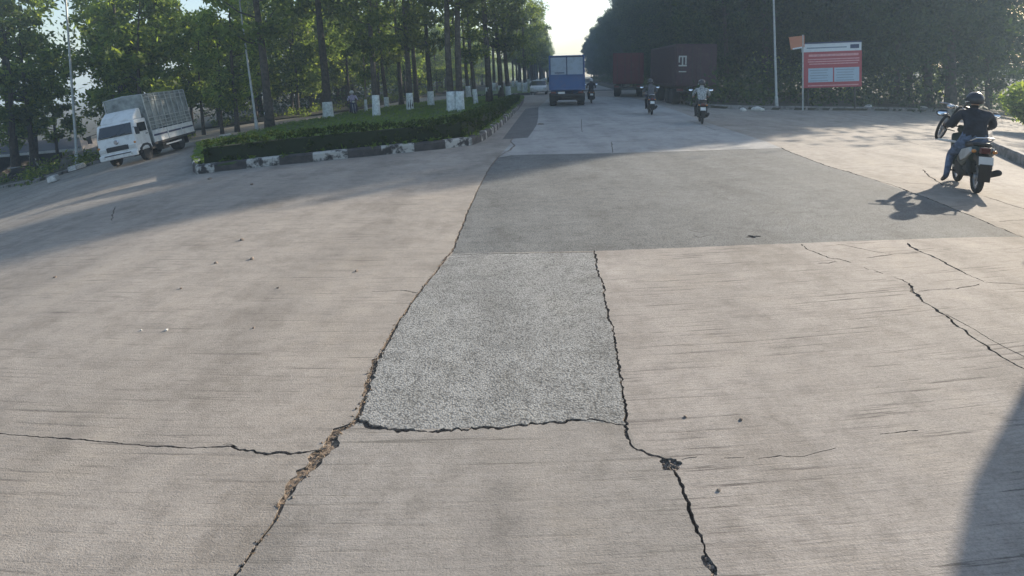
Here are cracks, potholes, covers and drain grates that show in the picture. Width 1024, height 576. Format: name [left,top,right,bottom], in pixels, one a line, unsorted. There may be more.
crack [0,433,317,455]
crack [359,250,919,564]
pothole [659,458,682,474]
crack [801,243,1024,369]
